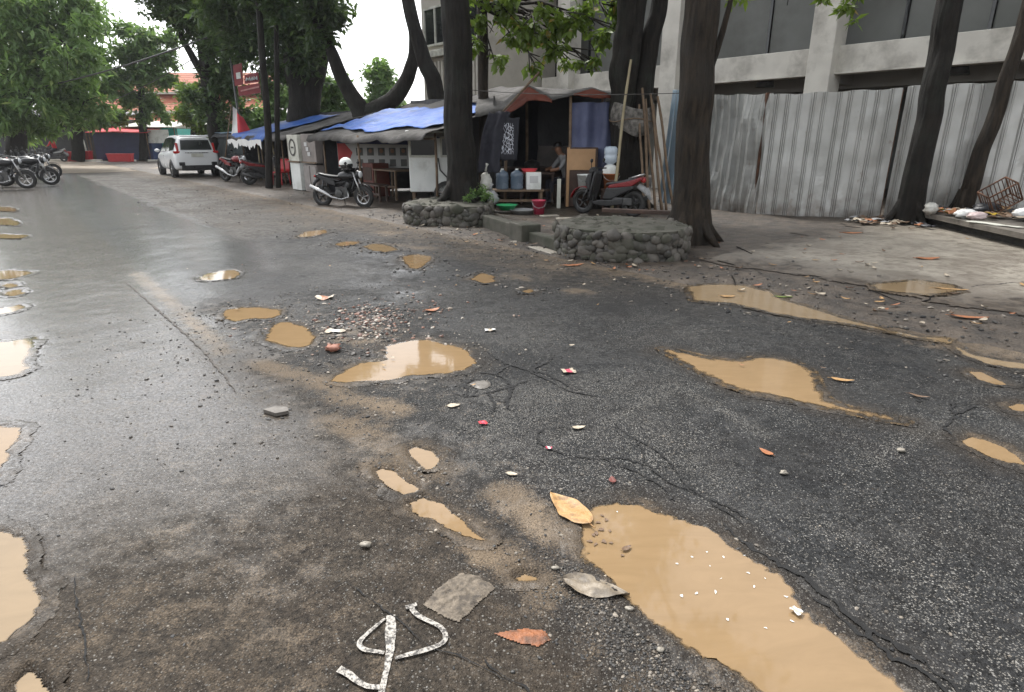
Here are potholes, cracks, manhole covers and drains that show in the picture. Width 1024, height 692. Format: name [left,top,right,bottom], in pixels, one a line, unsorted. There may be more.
pothole [864,279,970,297]
pothole [656,346,920,428]
pothole [682,283,958,345]
pothole [0,514,71,659]
pothole [559,492,930,692]
pothole [360,457,437,502]
crack [536,421,963,692]
crack [74,574,90,683]
pothole [214,306,289,324]
pothole [387,437,457,473]
pothole [321,336,487,388]
pothole [0,420,39,486]
